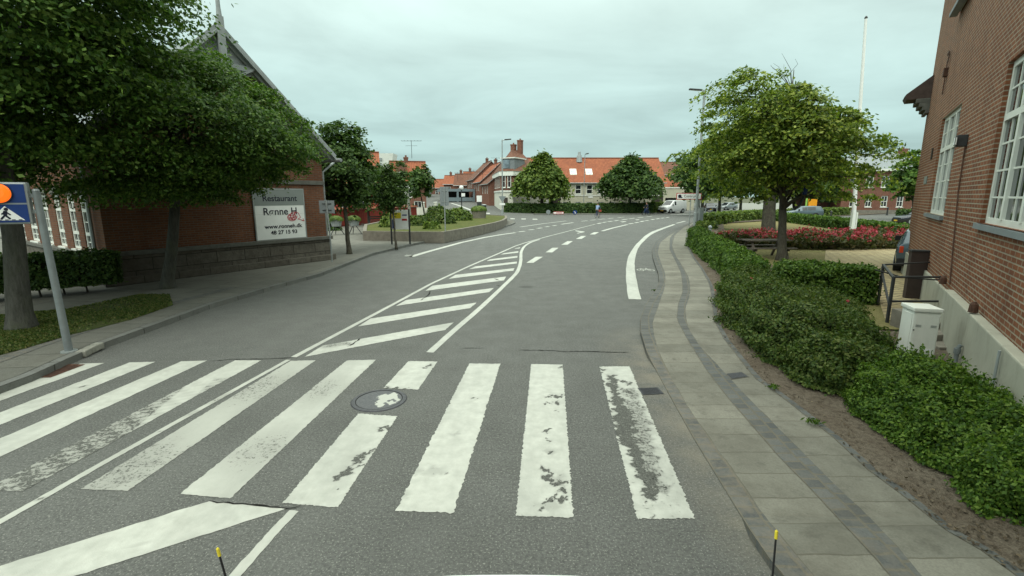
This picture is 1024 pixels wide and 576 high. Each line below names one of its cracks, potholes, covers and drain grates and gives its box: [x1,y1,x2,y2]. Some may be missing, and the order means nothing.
manhole cover [350,389,407,412]
drain grate [638,387,664,395]
